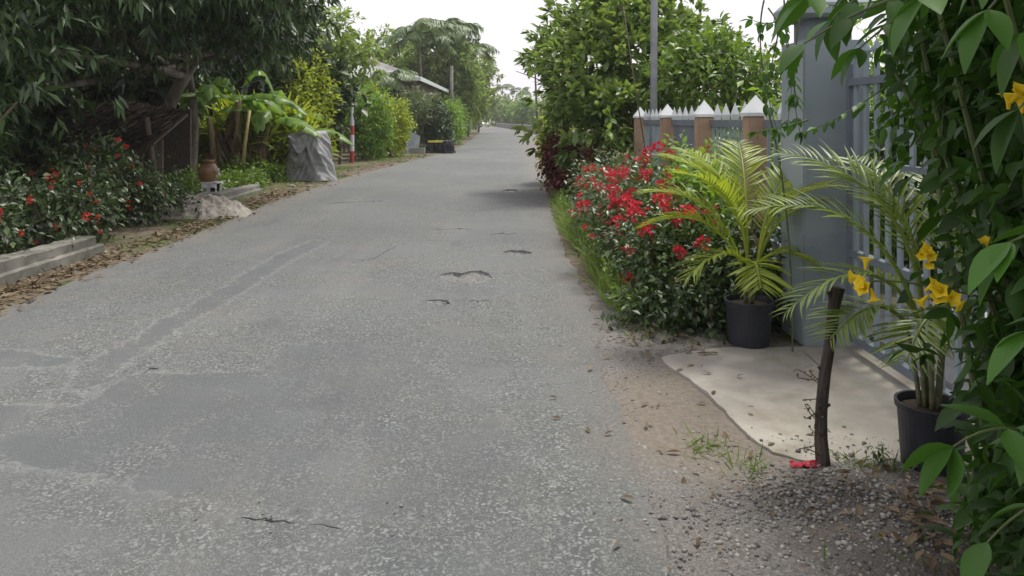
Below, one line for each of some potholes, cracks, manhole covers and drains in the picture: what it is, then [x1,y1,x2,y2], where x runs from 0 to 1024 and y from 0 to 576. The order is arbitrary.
pothole [436,270,493,284]
crack [242,516,340,529]
